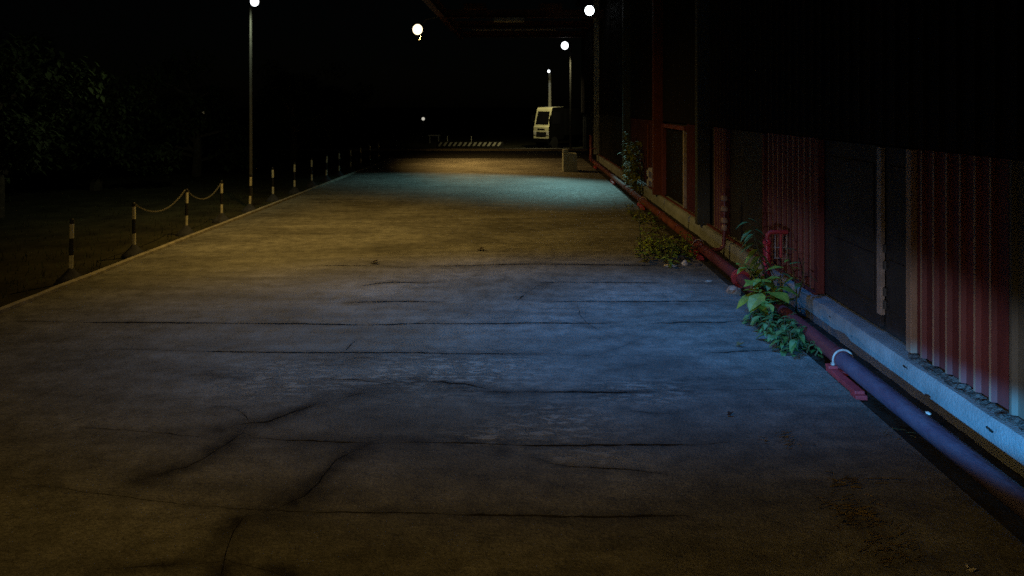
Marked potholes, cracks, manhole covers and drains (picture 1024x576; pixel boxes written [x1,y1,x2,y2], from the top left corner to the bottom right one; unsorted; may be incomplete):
crack [254,444,369,515]
crack [141,392,372,480]
crack [97,515,283,576]
